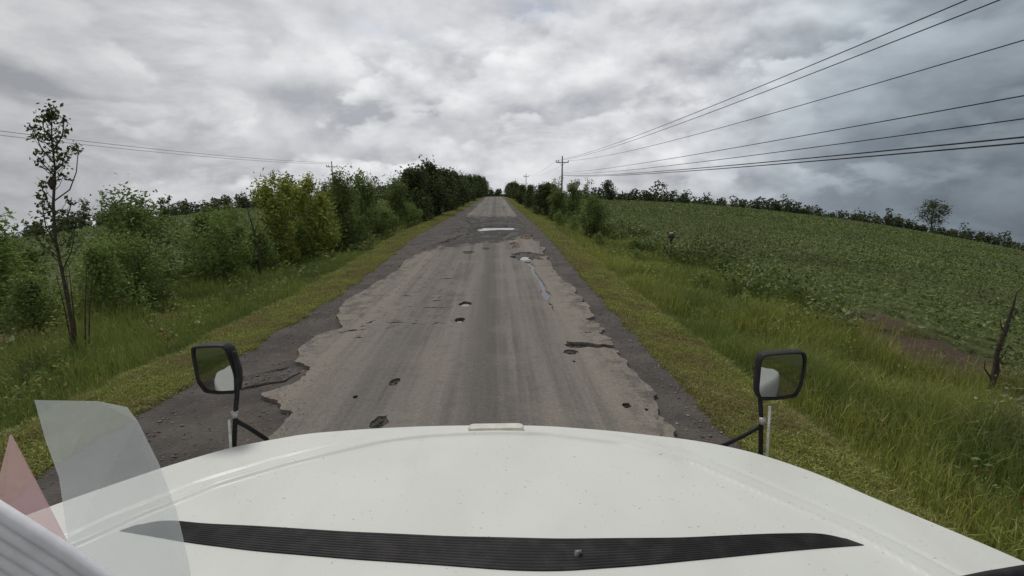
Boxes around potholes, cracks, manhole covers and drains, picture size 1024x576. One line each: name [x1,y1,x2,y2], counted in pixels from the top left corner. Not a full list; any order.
pothole [369,415,389,429]
pothole [510,252,545,261]
